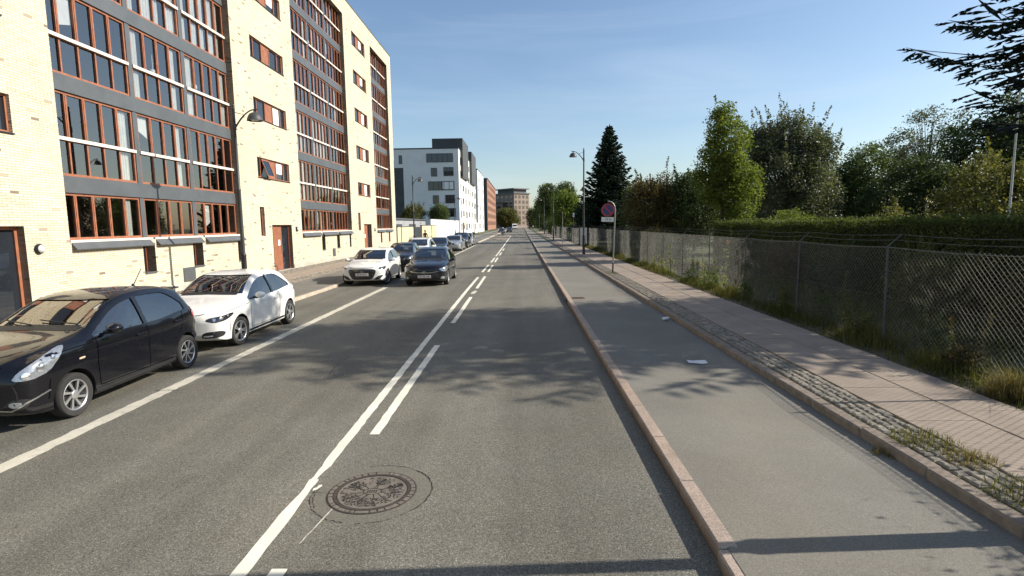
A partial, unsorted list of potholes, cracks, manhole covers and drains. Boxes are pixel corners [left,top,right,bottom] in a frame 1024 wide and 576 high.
manhole cover [326,472,417,515]
